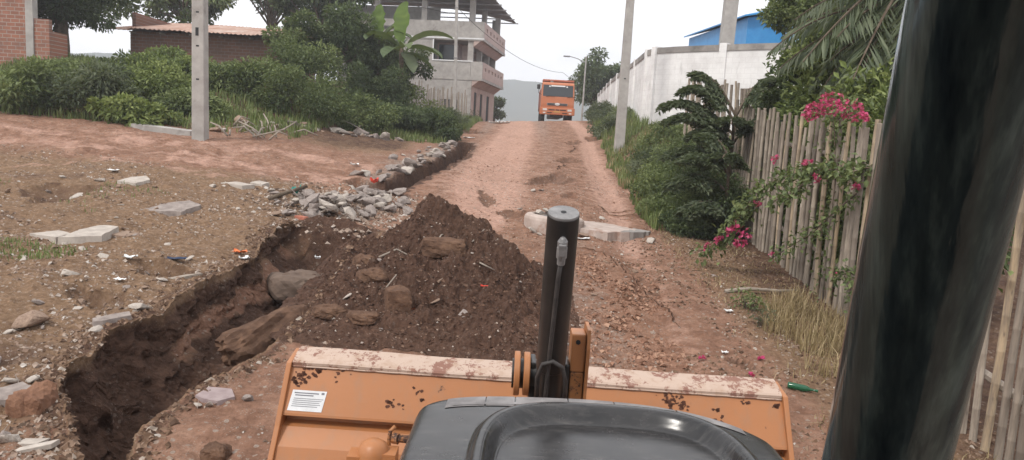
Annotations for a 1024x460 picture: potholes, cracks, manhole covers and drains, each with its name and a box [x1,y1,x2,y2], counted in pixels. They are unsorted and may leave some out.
crack [577,247,681,328]
